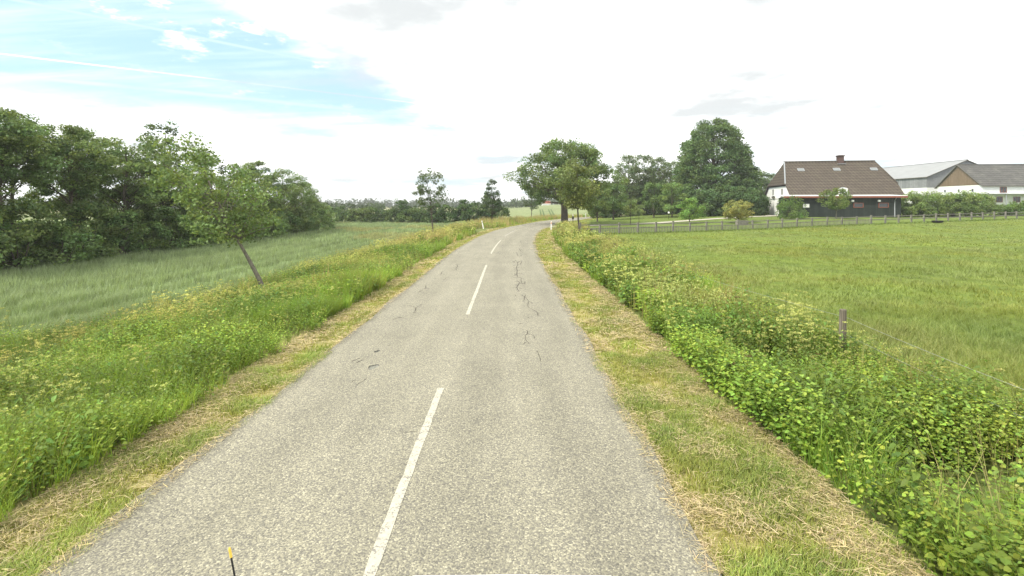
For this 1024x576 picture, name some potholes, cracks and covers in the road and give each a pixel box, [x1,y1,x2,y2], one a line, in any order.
crack [513,241,541,361]
